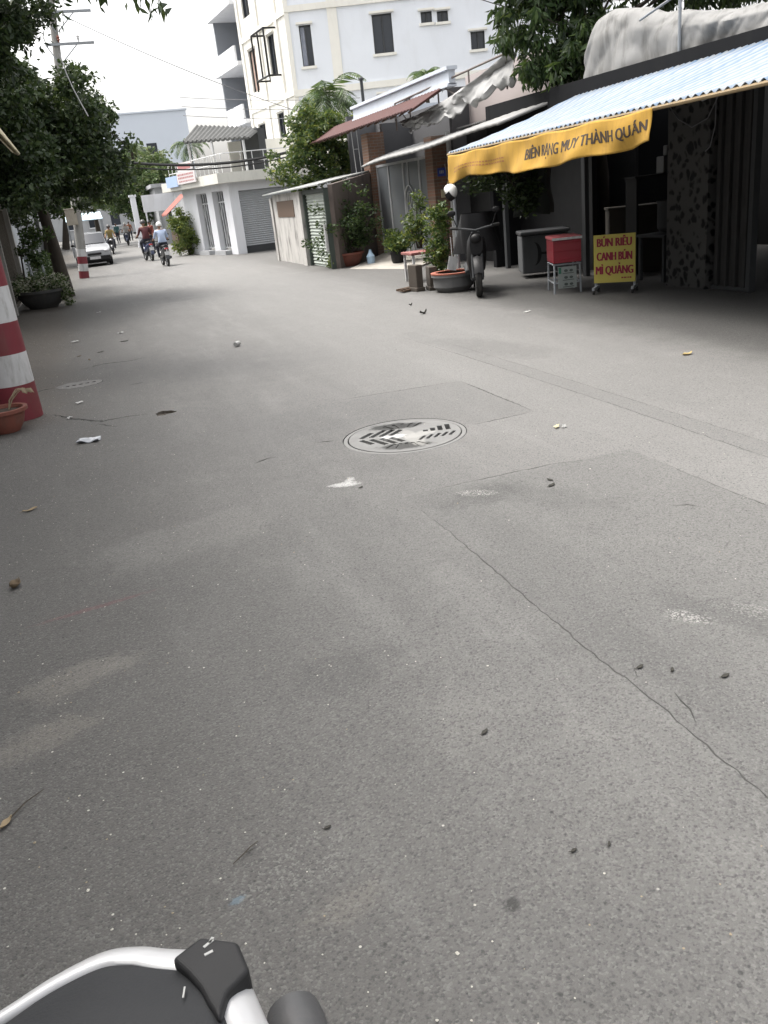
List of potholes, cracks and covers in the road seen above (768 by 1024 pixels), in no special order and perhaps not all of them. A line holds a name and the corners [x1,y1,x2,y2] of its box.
manhole cover [343,418,467,454]
crack [54,414,144,426]
